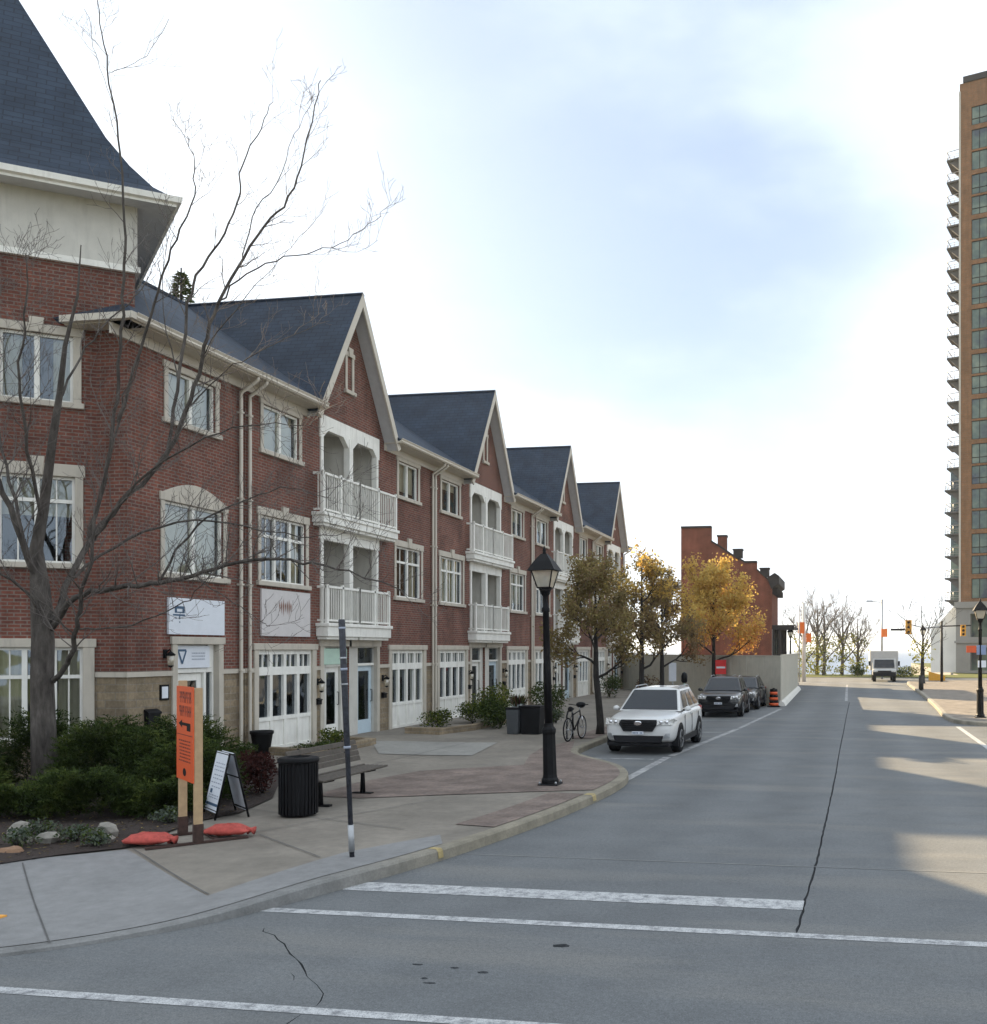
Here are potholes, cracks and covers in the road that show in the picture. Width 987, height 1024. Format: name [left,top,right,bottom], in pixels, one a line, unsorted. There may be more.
crack [262,929,324,1024]
